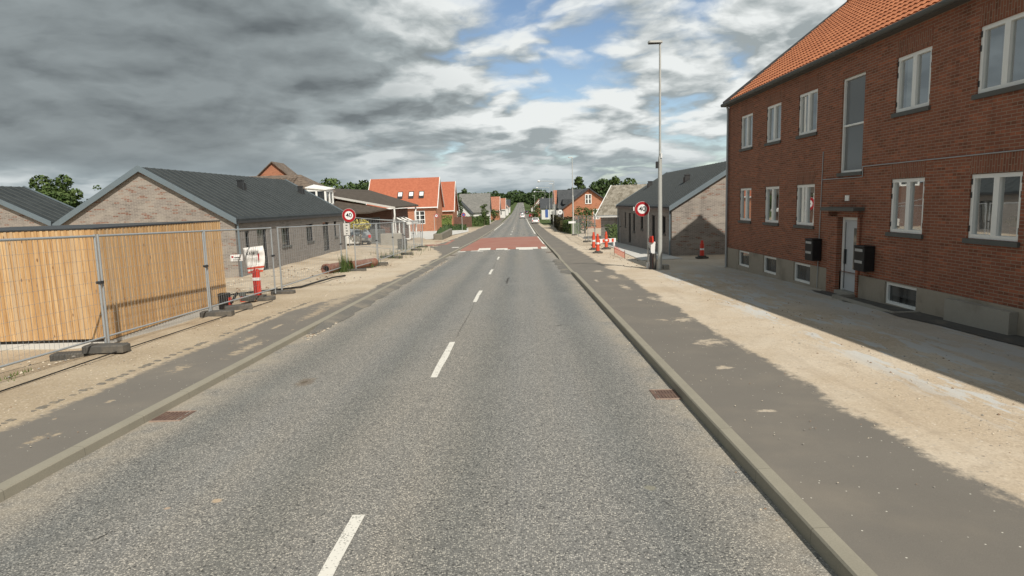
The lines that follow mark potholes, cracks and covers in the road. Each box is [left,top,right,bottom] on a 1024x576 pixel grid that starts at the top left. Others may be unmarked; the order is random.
drain grate [649,389,682,400]
drain grate [149,410,197,422]
